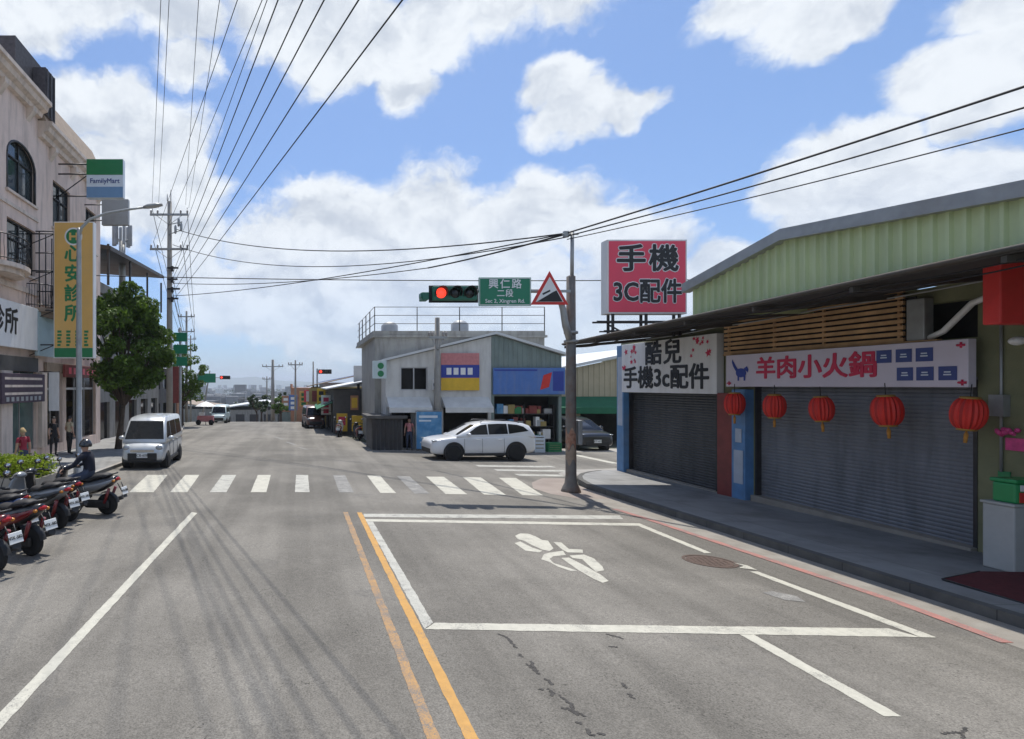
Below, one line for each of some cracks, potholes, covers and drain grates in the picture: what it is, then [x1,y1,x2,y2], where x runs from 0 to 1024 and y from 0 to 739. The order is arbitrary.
manhole cover [682,554,739,568]
crack [939,727,968,738]
crack [499,634,606,736]
